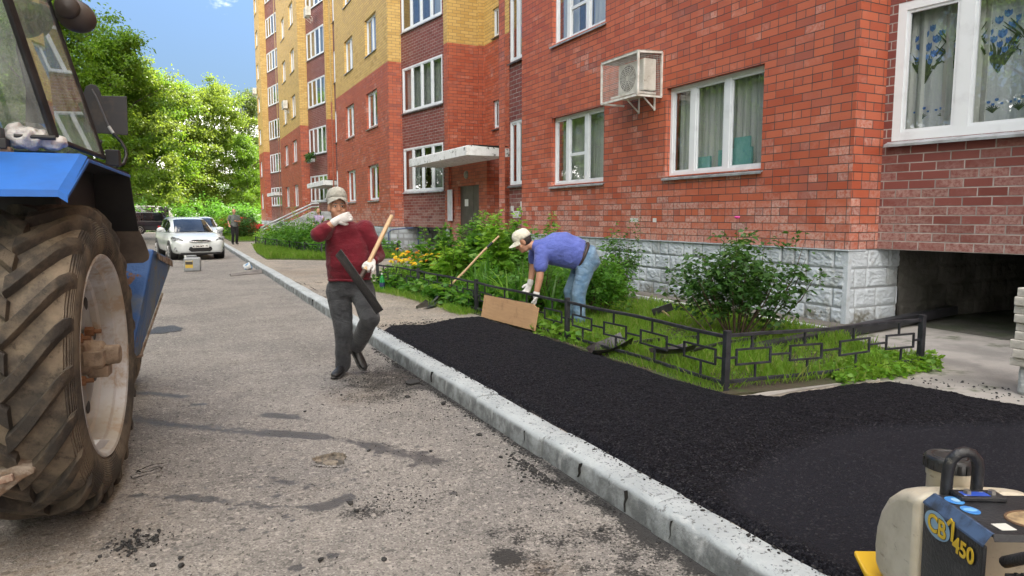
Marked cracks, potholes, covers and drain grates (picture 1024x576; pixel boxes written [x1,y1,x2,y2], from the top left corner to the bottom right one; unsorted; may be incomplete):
pothole [307,451,351,468]
